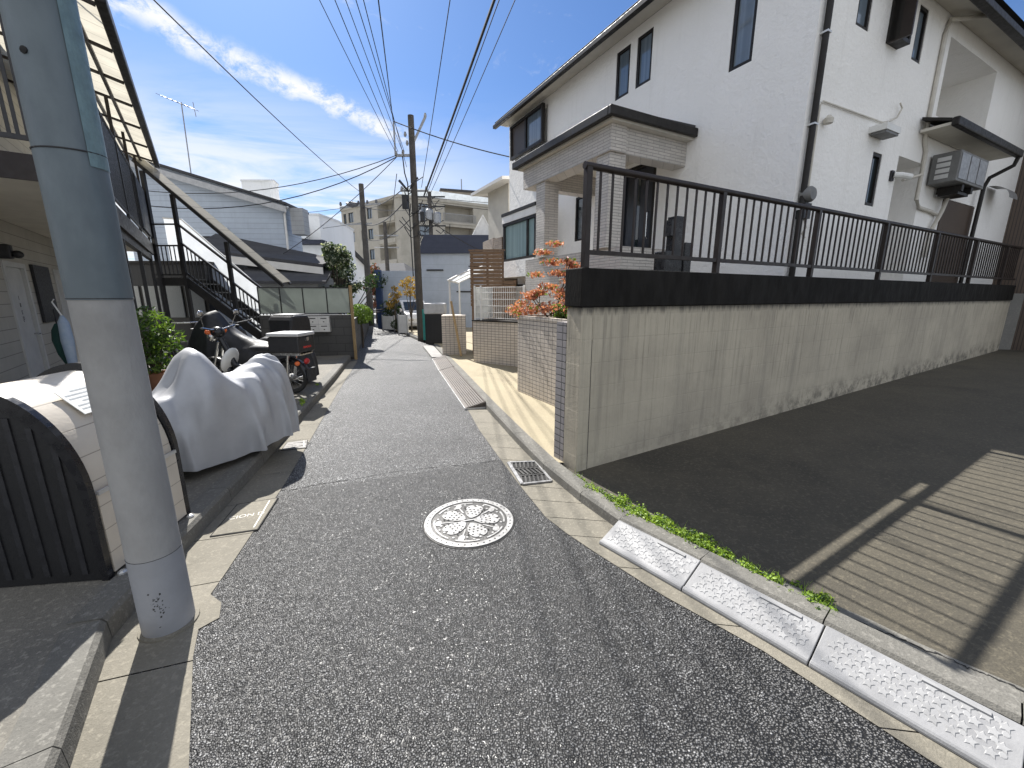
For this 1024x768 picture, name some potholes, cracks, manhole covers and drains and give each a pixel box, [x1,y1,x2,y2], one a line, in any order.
manhole cover [423,499,515,549]
drain grate [507,461,553,485]
